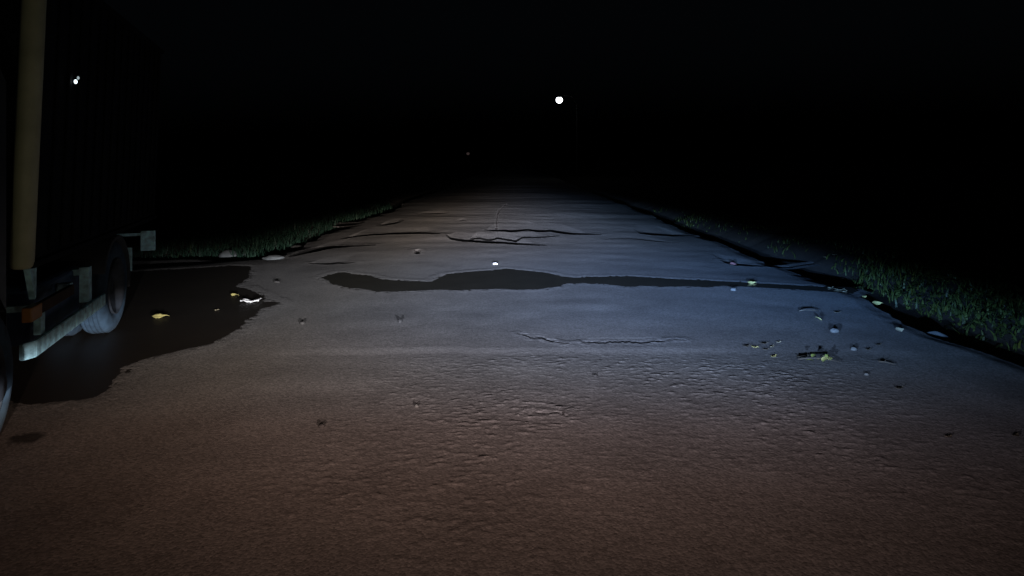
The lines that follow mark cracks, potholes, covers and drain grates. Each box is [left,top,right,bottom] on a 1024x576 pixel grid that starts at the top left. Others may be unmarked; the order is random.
pothole [308,266,870,297]
crack [516,405,578,423]
crack [509,331,693,347]
